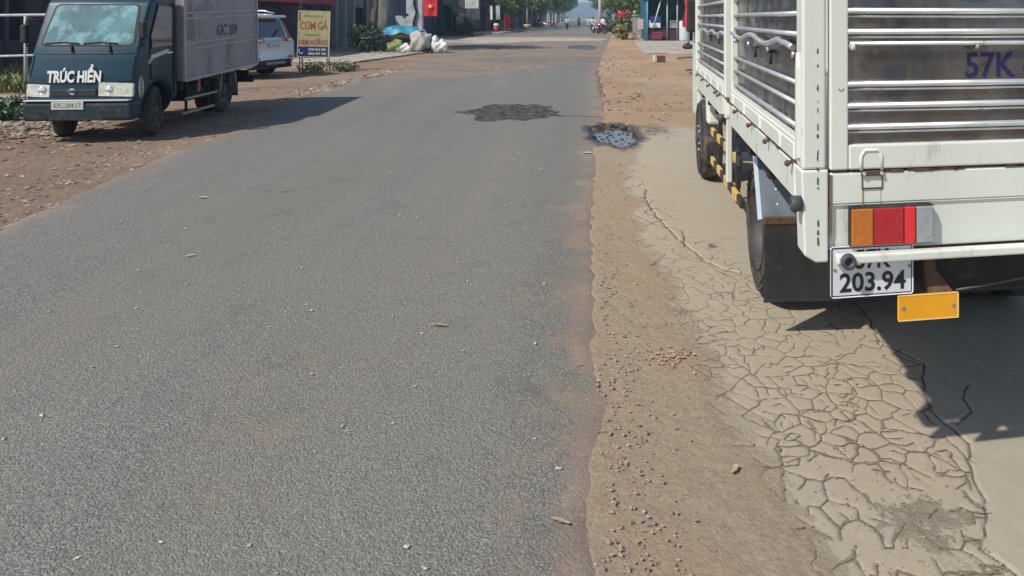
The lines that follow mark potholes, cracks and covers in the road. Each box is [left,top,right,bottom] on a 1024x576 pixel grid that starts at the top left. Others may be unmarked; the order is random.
pothole [586,122,644,148]
crack [638,235,1017,576]
